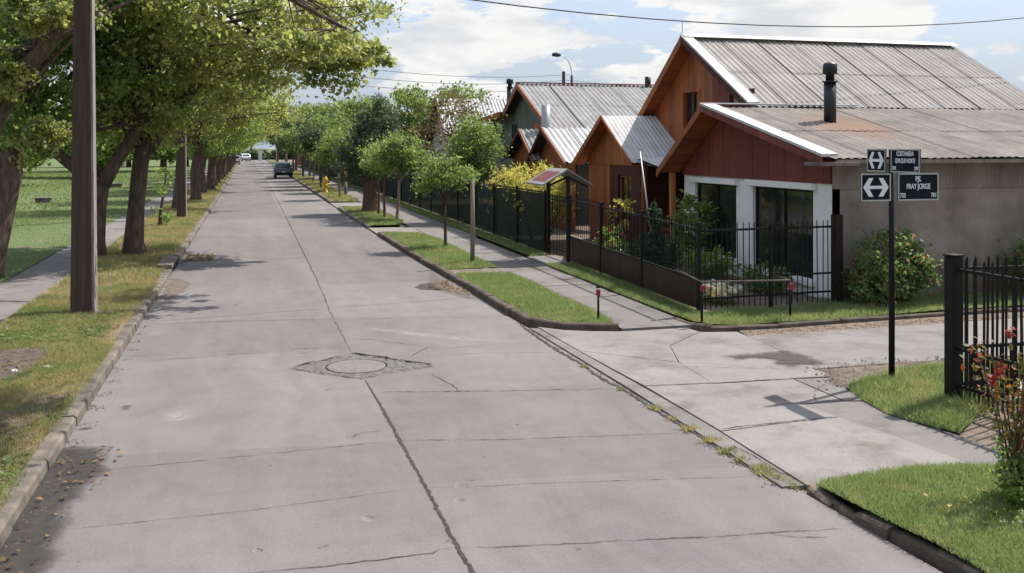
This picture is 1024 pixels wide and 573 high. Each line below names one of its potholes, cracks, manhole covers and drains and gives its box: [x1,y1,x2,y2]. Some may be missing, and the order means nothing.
pothole [414,281,454,291]
manhole cover [294,353,433,379]
